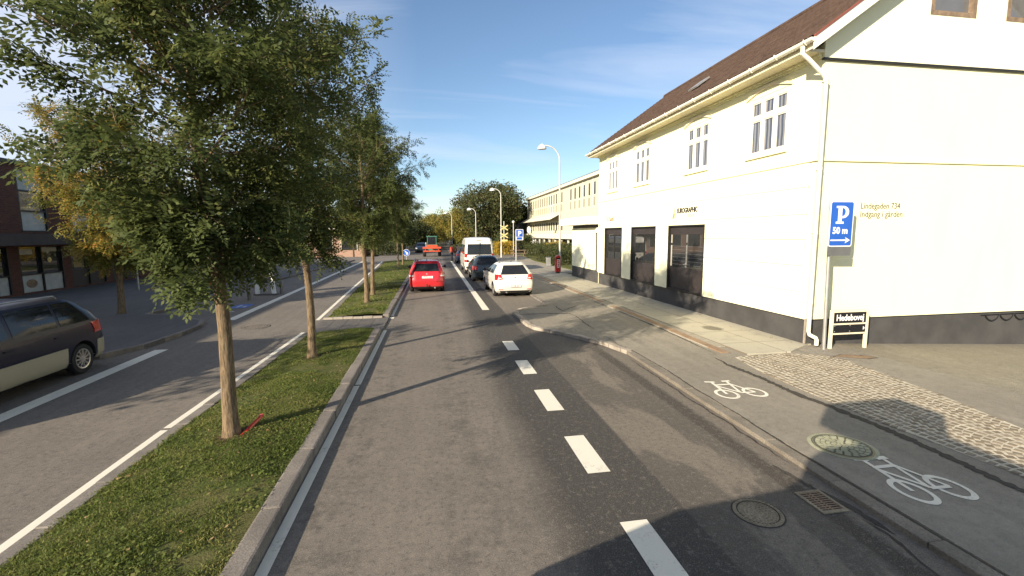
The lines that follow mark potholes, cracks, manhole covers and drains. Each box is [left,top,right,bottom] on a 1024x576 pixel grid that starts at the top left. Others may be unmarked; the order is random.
crack [537,306,594,329]
drain grate [794,489,850,515]
manhole cover [807,433,880,461]
manhole cover [730,498,787,528]
